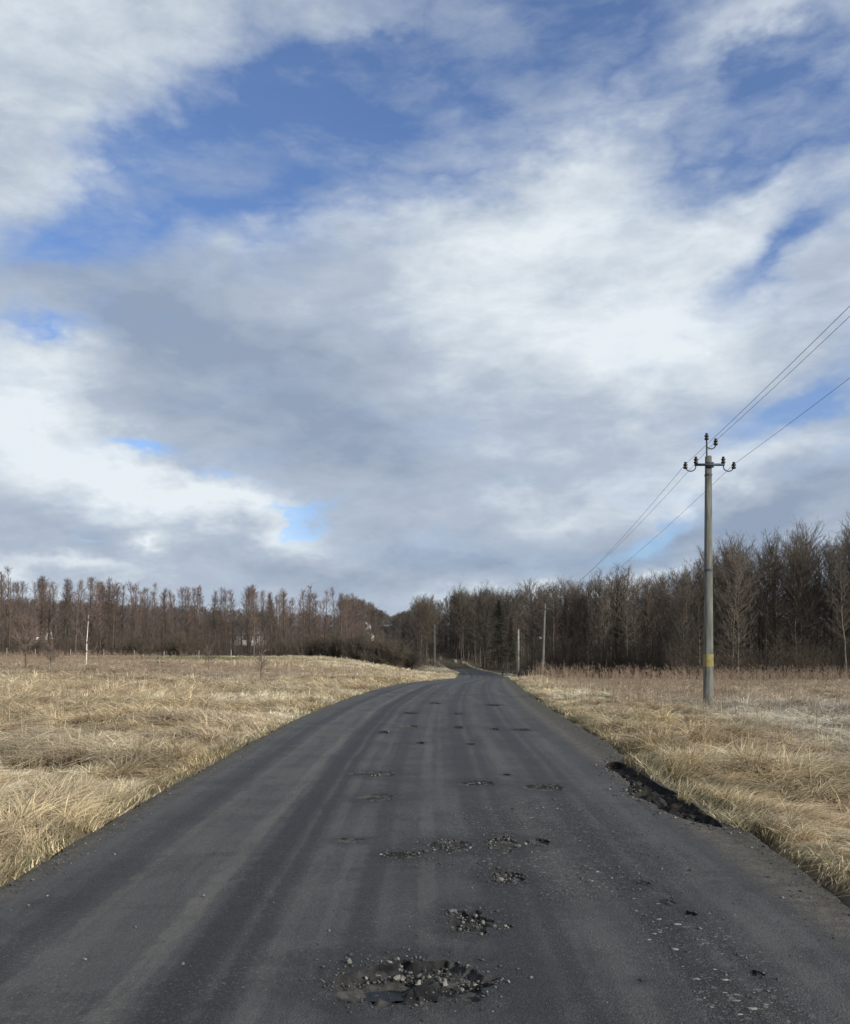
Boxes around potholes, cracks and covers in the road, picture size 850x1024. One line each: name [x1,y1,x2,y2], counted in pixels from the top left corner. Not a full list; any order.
pothole [386,851,418,859]
pothole [488,871,526,883]
pothole [523,784,564,792]
pothole [605,762,723,827]
pothole [356,794,392,802]
pothole [327,959,499,1007]
pothole [447,910,495,934]
pothole [487,836,520,854]
pothole [429,840,471,853]
